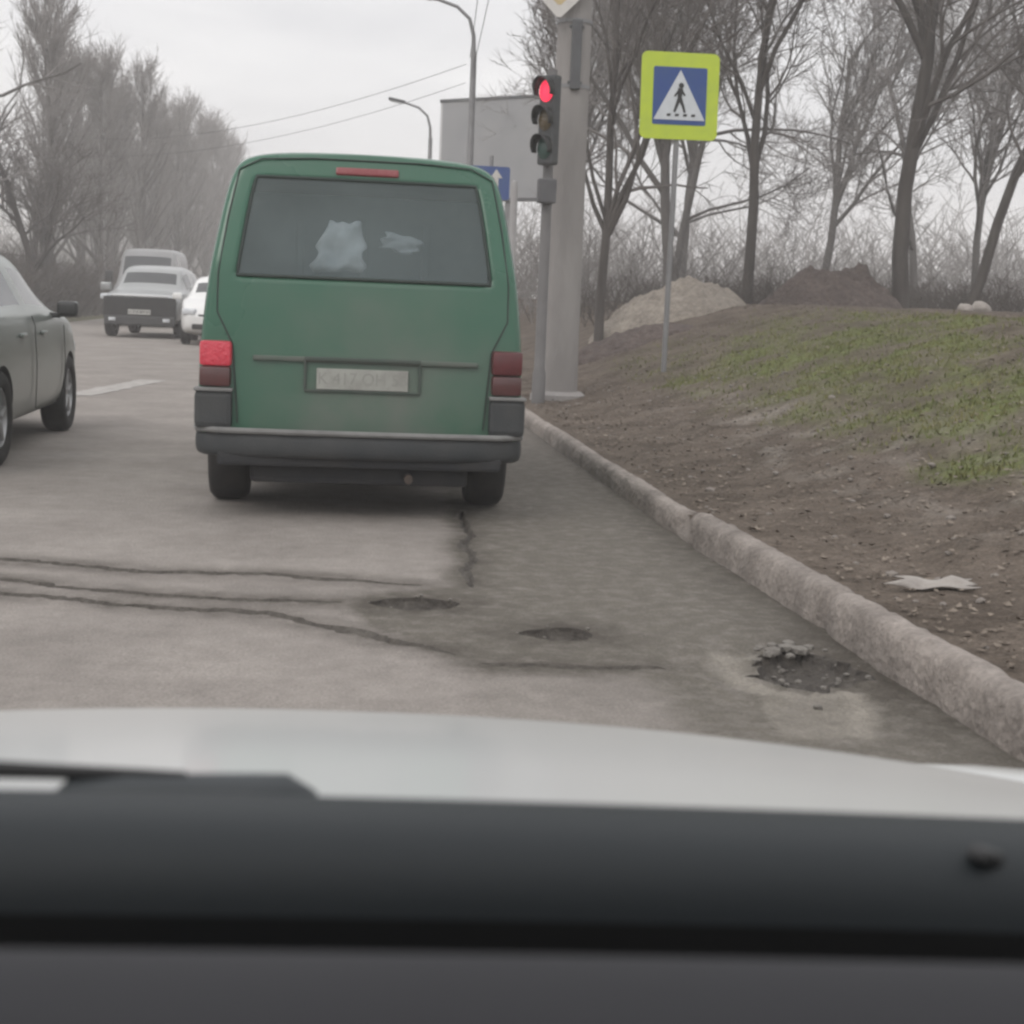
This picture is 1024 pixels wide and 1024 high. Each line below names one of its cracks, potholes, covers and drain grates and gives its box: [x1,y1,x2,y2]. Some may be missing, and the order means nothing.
pothole [516,626,592,641]
pothole [745,640,876,709]
pothole [368,594,461,610]
crack [0,510,479,655]
